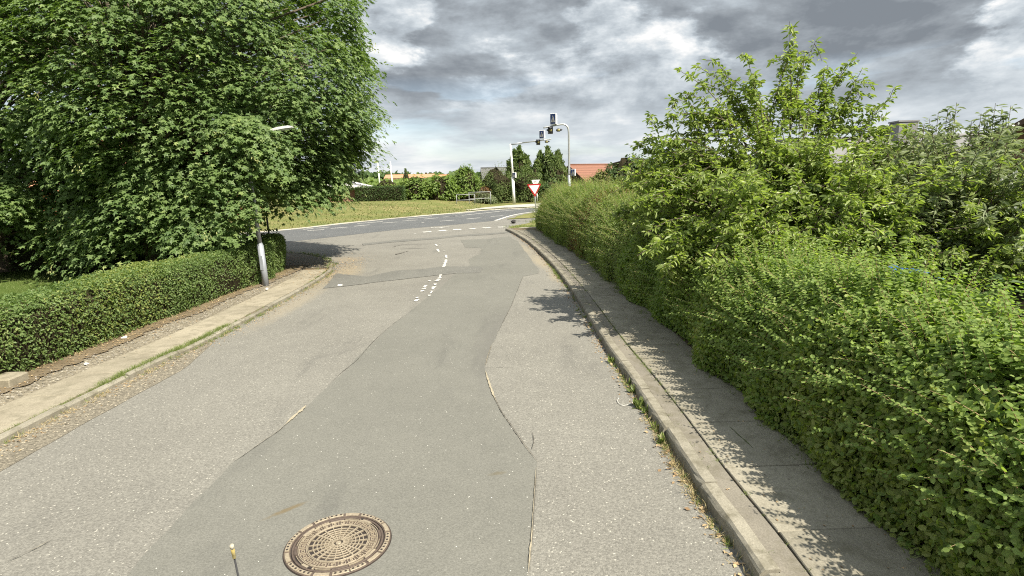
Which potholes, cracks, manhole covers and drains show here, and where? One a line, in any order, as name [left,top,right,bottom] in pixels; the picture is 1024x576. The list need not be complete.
manhole cover [282,513,392,576]
